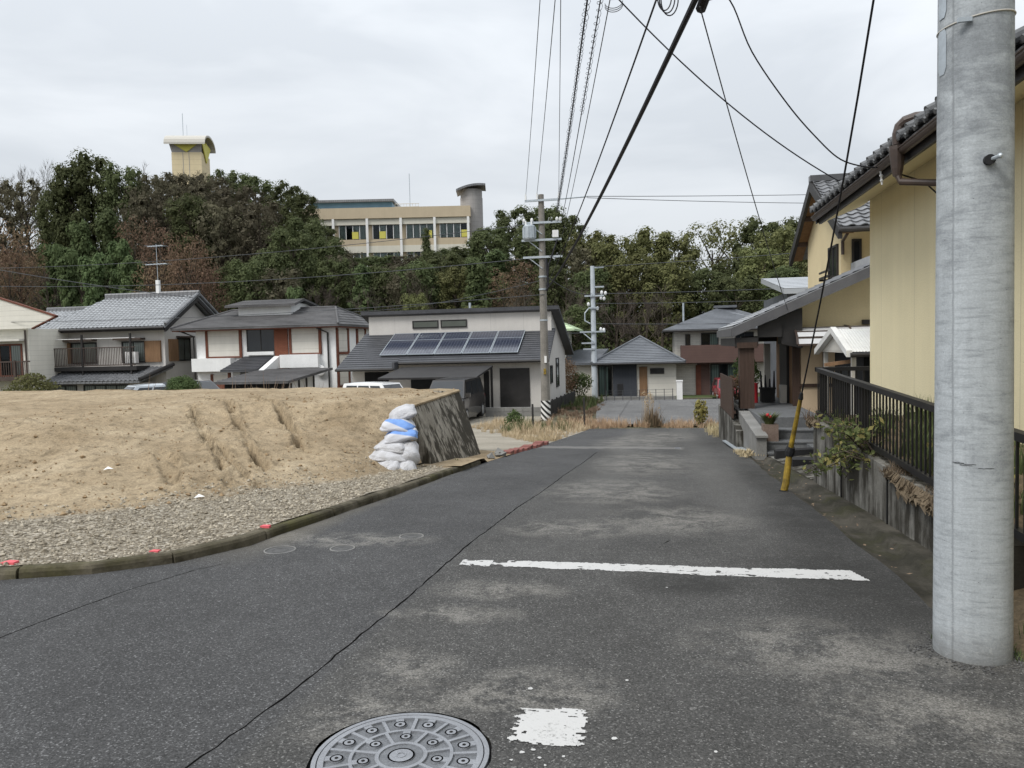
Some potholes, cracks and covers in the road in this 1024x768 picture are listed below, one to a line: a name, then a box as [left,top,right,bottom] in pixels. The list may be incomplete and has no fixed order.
manhole cover [307,713,492,768]
